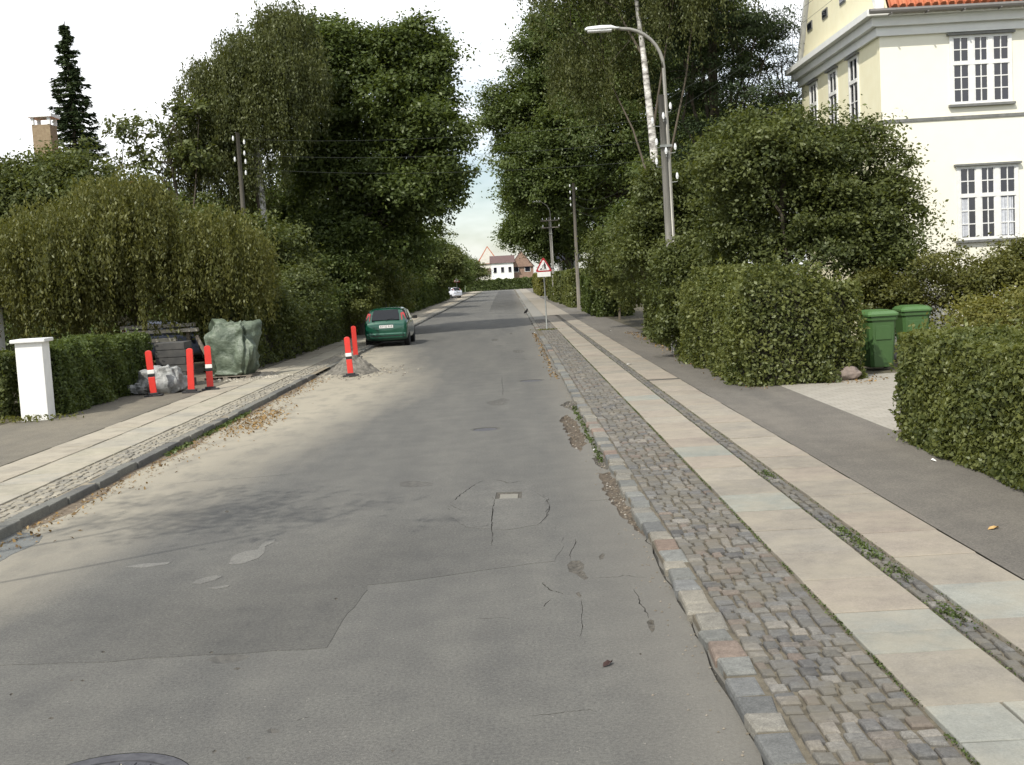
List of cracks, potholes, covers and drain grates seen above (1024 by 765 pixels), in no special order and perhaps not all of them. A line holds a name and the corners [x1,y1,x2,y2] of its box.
manhole cover [69,753,188,765]
